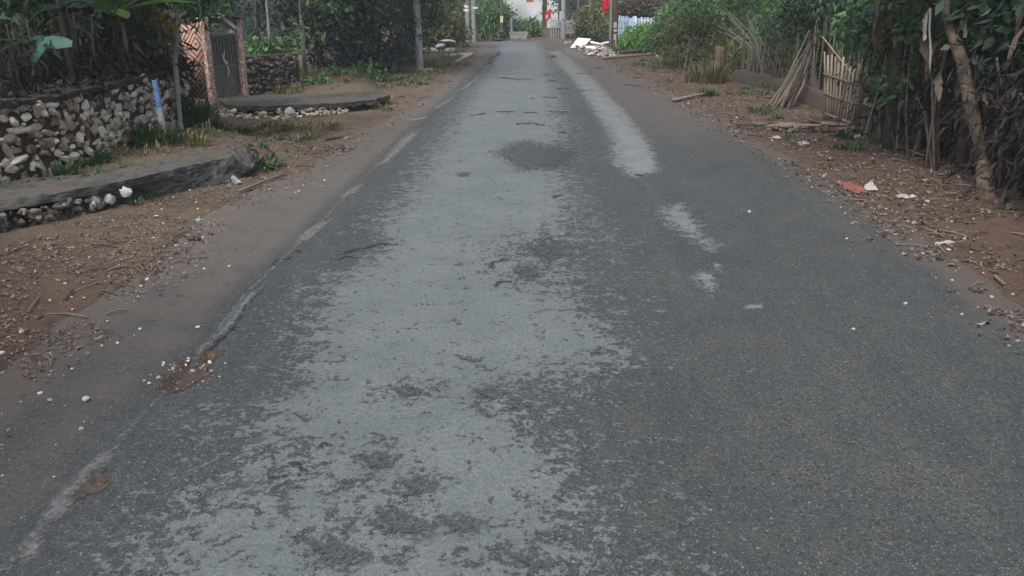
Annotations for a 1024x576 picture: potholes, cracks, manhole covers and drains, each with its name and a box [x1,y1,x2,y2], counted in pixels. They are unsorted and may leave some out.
pothole [68,467,112,500]
crack [337,243,402,260]
crack [470,55,603,133]
pothole [152,350,226,395]
crack [209,289,263,356]
